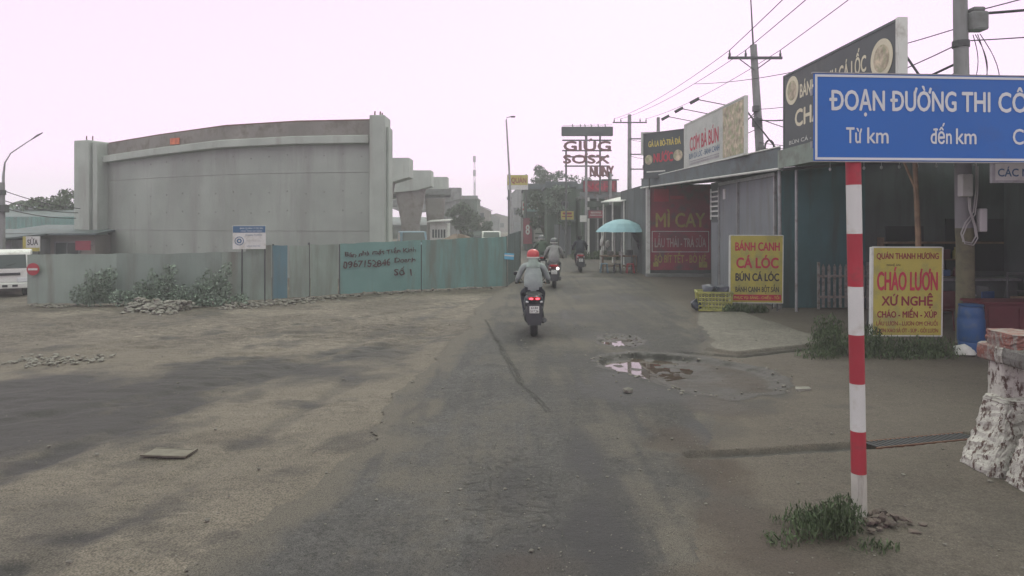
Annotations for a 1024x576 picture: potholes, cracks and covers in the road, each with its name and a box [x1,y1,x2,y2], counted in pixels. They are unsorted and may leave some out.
pothole [594,333,648,347]
pothole [584,351,794,401]
crack [478,321,551,412]
